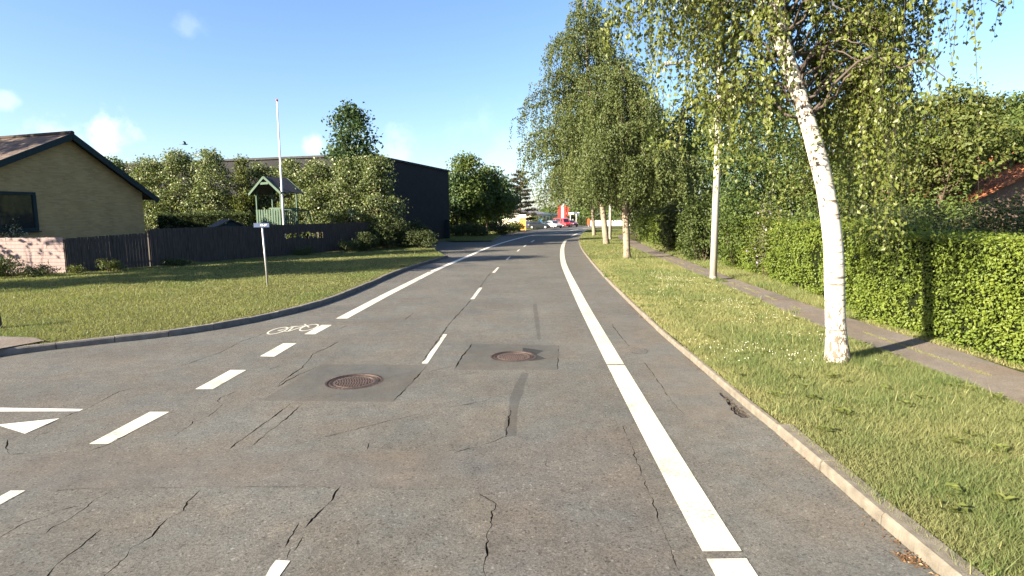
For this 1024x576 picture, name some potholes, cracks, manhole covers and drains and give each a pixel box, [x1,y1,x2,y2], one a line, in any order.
pothole [719,393,751,418]
crack [395,344,472,399]
crack [285,487,340,557]
crack [477,492,497,576]
manhole cover [325,373,383,390]
crack [269,326,345,387]
manhole cover [490,351,536,362]
crack [458,410,511,452]
crack [183,392,303,450]
crack [1,488,203,576]
